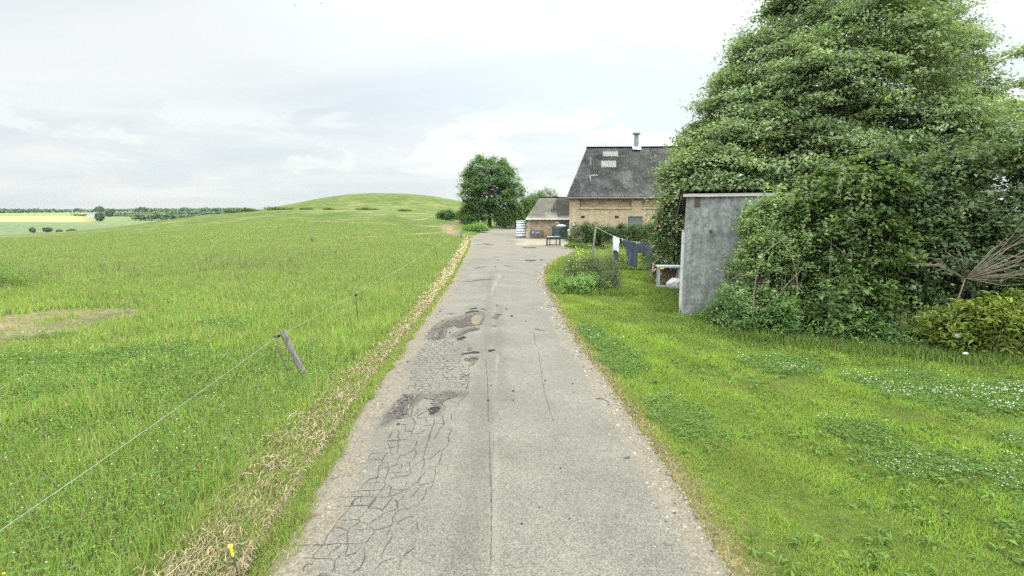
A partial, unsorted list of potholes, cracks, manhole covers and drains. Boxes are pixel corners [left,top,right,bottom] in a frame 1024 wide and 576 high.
crack [299,335,479,573]
